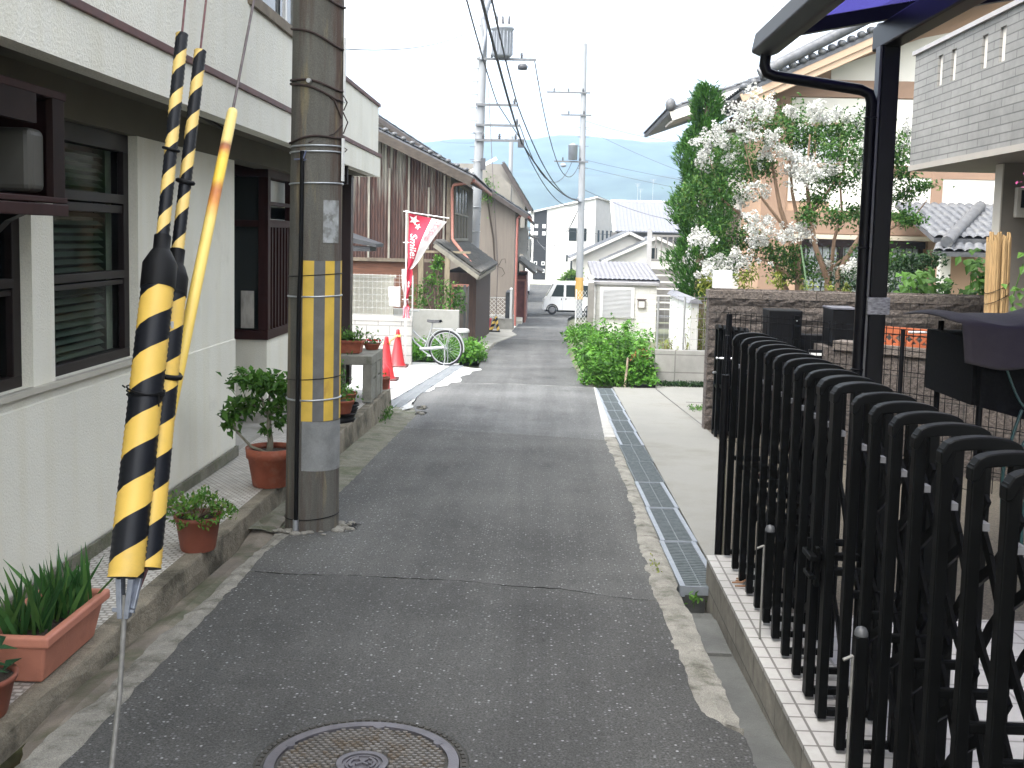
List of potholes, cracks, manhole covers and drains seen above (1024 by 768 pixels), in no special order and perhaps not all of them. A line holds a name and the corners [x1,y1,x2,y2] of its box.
drain grate [605,410,631,422]
drain grate [634,481,679,510]
drain grate [659,540,709,597]
drain grate [601,401,625,411]
drain grate [626,461,665,484]
drain grate [619,445,654,464]
drain grate [609,420,637,433]
drain grate [598,394,621,403]
drain grate [645,507,697,544]
crack [255,571,637,600]
manhole cover [253,719,469,768]
drain grate [613,431,645,447]
